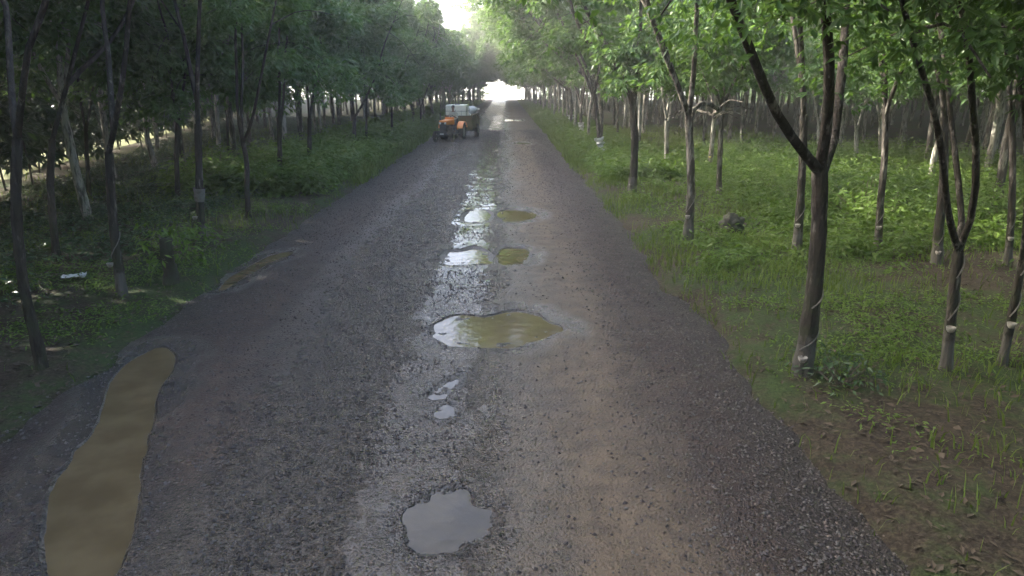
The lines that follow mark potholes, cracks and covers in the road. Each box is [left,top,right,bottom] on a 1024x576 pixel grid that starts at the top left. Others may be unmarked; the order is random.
pothole [496,208,537,222]
pothole [218,251,294,291]
pothole [496,247,532,265]
pothole [438,245,496,265]
pothole [429,309,564,348]
pothole [400,483,499,556]
pothole [426,371,468,400]
pothole [433,400,465,419]
pothole [459,210,495,223]
pothole [39,346,178,576]
